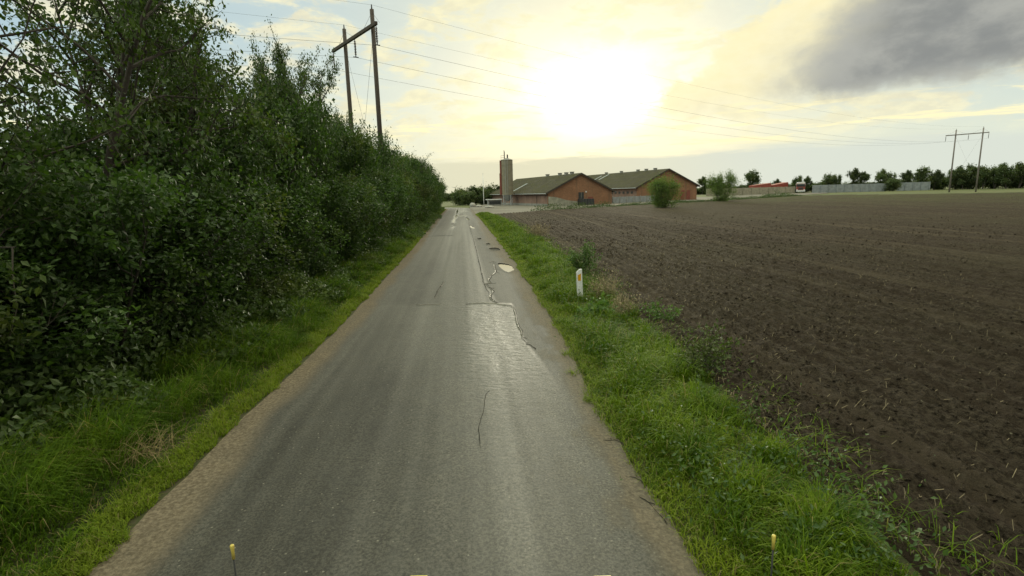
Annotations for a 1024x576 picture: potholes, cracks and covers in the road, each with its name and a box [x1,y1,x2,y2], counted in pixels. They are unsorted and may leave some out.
crack [469,261,536,349]
pothole [495,262,518,274]
